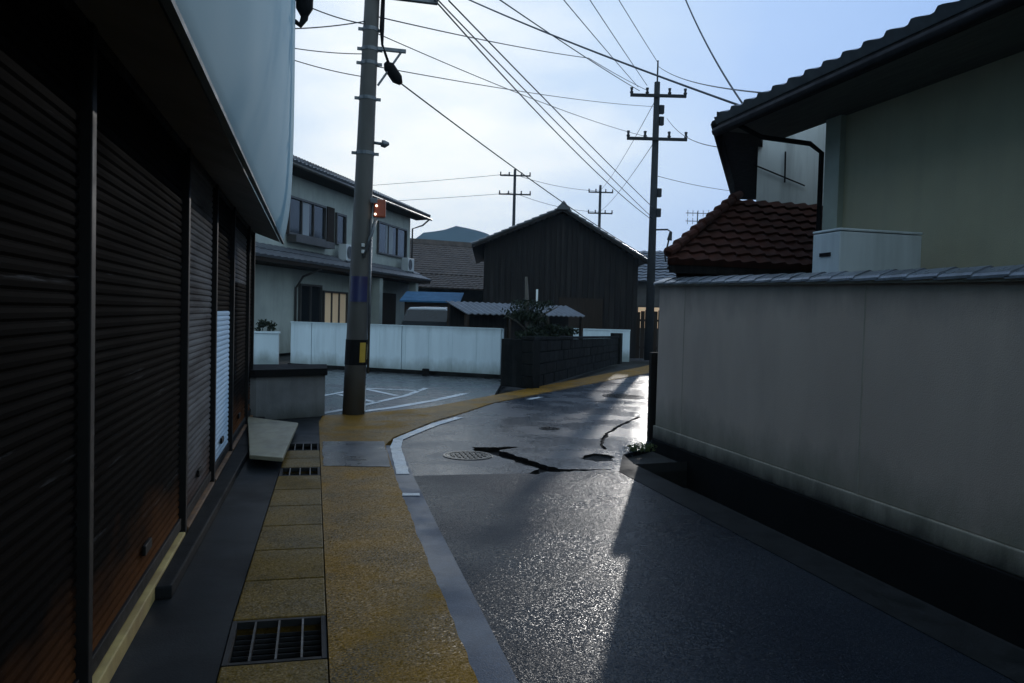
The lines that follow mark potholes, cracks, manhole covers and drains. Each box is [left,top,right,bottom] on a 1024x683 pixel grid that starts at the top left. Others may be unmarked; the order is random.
drain grate [287,443,319,451]
drain grate [221,615,327,667]
crack [473,417,640,474]
pothole [581,454,615,462]
drain grate [279,467,320,476]
manhole cover [443,451,493,460]
